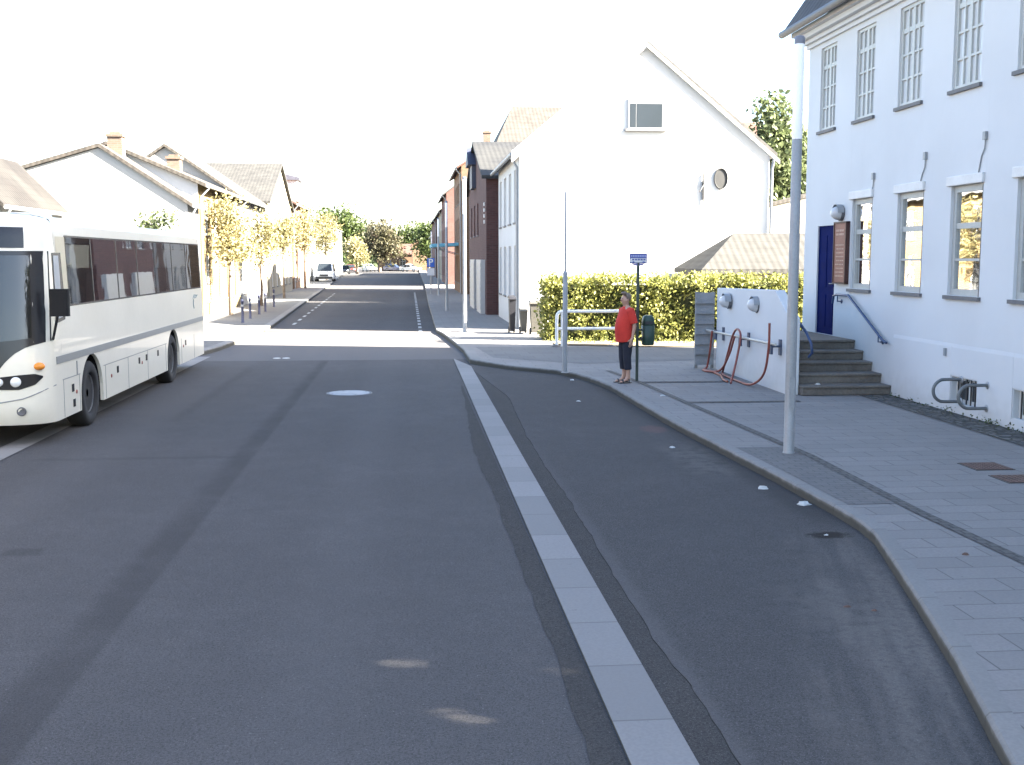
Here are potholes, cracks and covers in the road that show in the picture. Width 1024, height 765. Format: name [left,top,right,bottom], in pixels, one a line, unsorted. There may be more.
utility cover [988,474,1024,484]
utility cover [957,462,1016,471]
